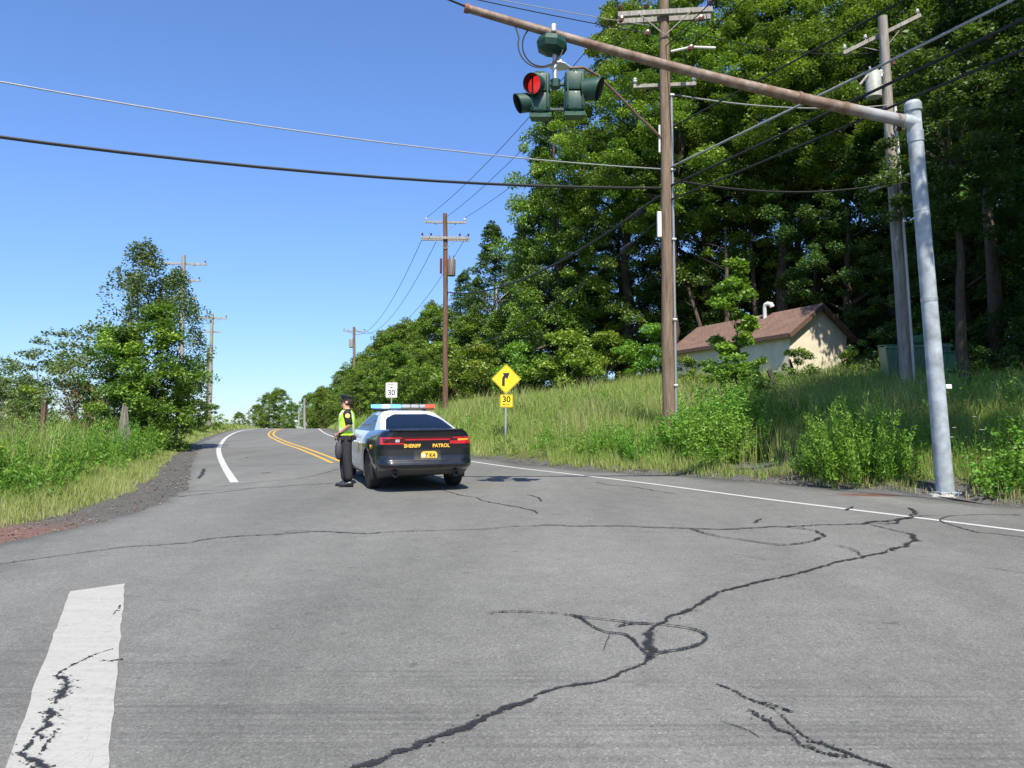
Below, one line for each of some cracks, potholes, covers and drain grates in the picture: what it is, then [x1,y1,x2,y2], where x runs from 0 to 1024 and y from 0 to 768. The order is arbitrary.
crack [12,648,123,768]
crack [716,683,892,768]
crack [0,483,938,564]
crack [940,514,1023,537]
